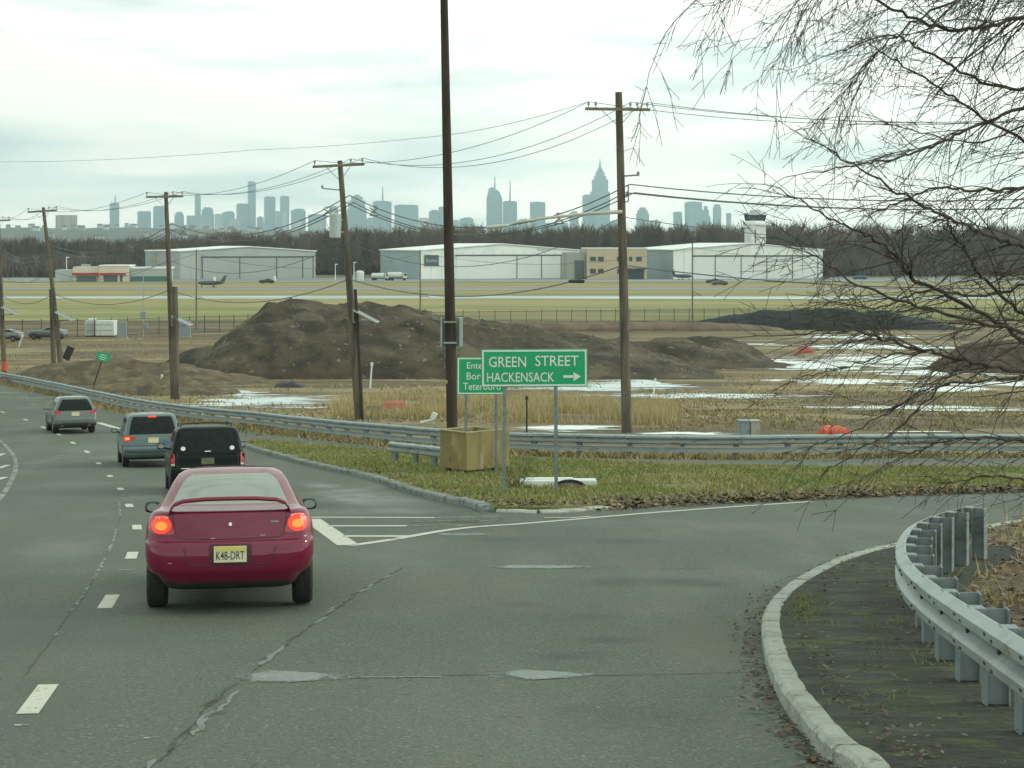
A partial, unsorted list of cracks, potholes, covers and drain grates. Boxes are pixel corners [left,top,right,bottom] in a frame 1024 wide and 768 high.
crack [143,566,761,768]
